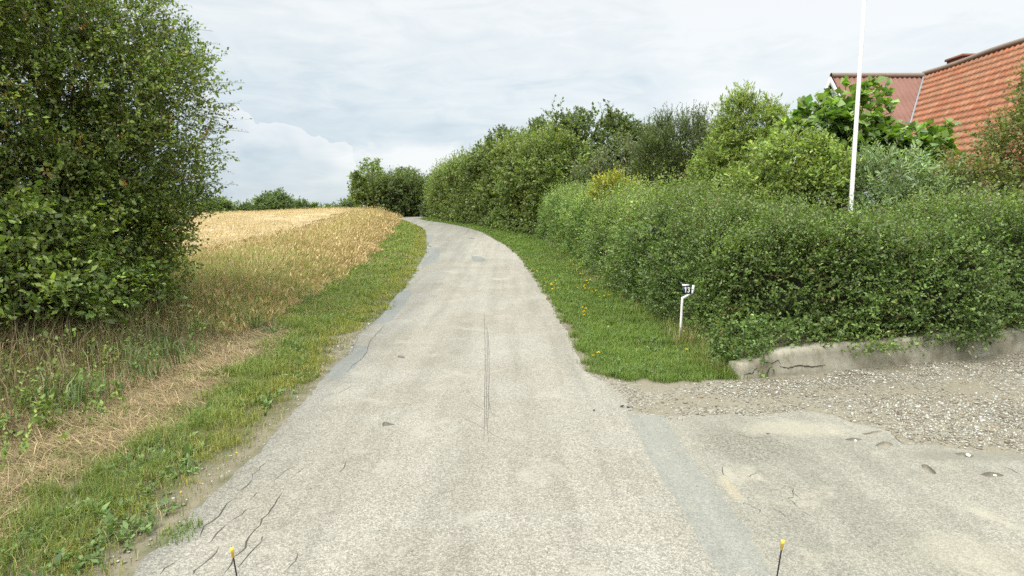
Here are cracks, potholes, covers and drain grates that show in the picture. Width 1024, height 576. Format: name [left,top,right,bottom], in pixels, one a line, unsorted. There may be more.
crack [160,454,302,574]
crack [464,319,506,442]
crack [722,466,810,518]
